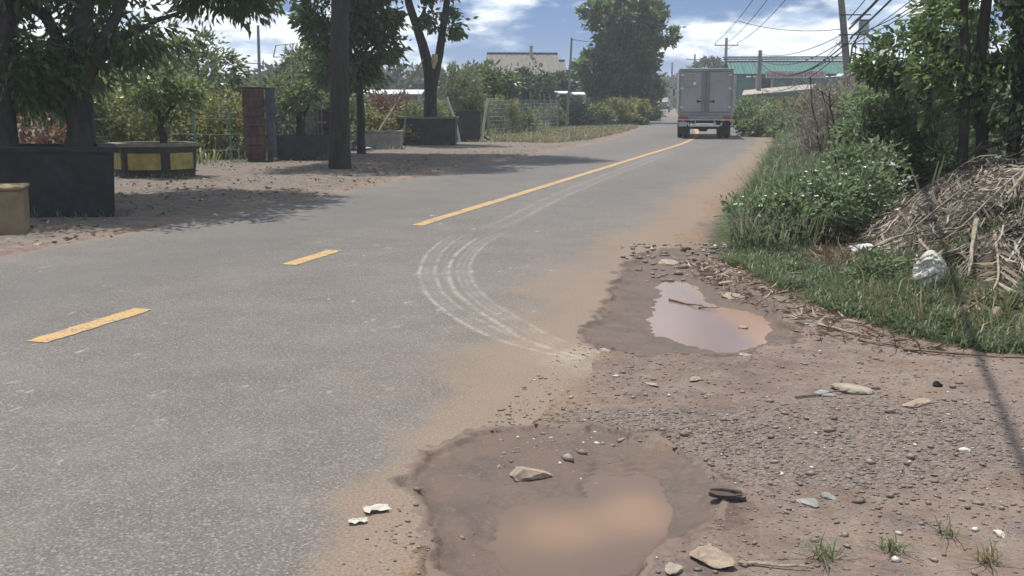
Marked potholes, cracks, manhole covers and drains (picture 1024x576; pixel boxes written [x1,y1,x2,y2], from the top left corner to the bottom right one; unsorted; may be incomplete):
pothole [577,248,801,356]
pothole [386,420,740,576]
